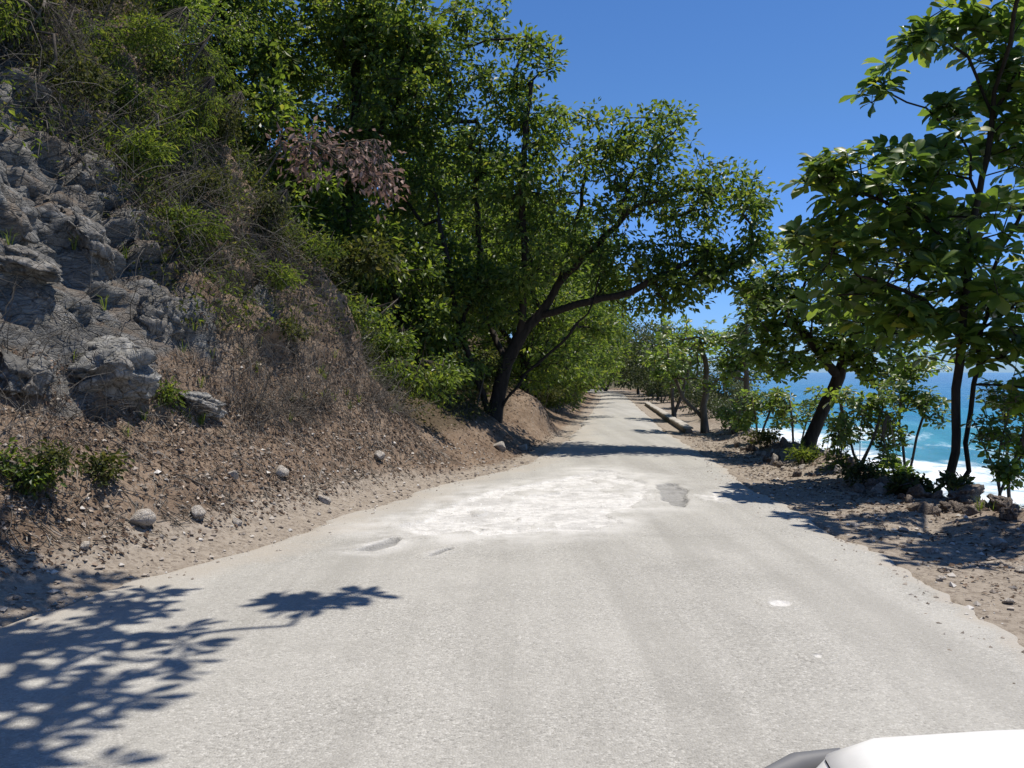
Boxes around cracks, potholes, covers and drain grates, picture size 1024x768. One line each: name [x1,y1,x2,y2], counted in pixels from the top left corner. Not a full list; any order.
pothole [342,535,411,554]
pothole [648,482,696,509]
